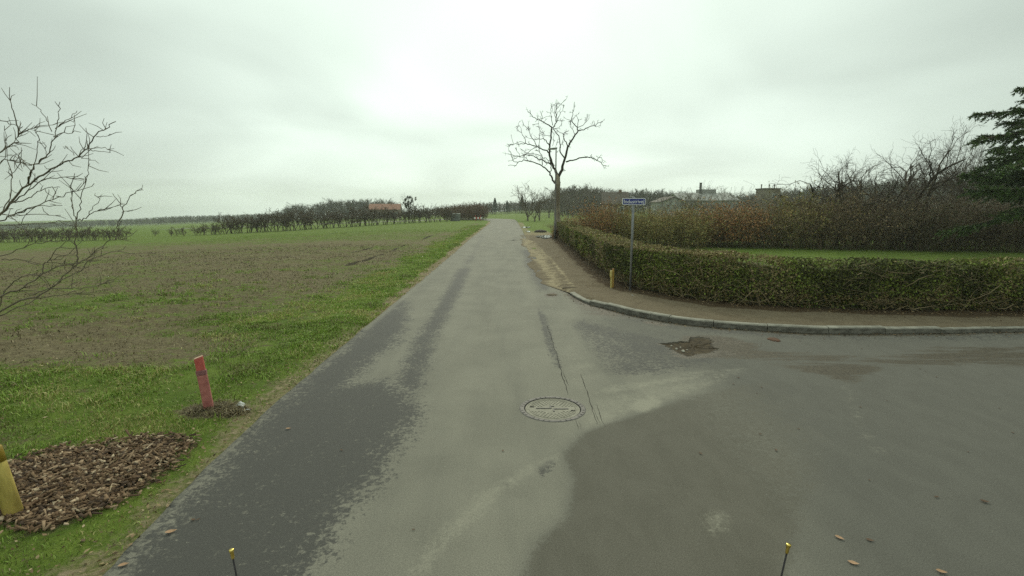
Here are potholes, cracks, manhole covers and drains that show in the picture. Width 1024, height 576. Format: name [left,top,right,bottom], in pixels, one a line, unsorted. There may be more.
crack [547,326,604,429]
manhole cover [519,396,586,422]
pothole [658,336,720,357]
